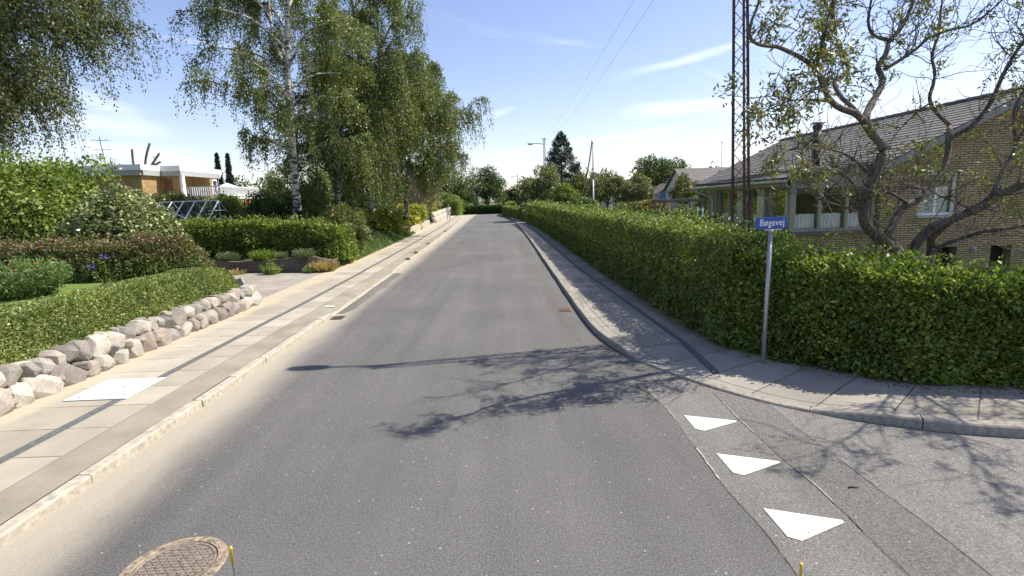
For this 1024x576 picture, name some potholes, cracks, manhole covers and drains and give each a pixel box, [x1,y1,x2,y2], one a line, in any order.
manhole cover [119,536,228,576]
utility cover [63,377,165,401]
